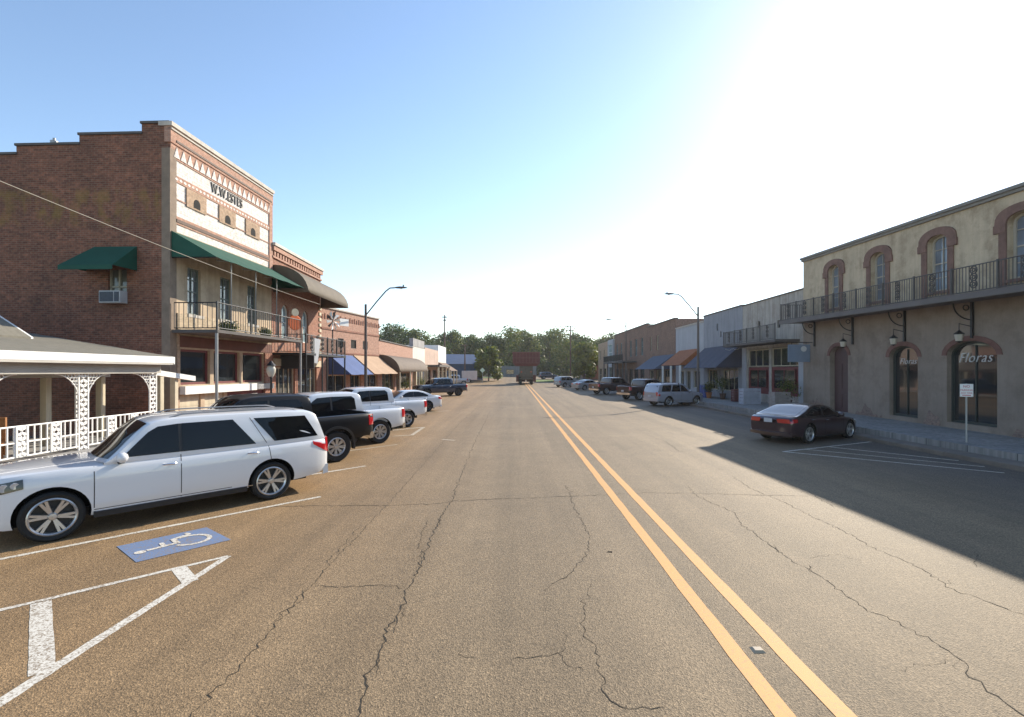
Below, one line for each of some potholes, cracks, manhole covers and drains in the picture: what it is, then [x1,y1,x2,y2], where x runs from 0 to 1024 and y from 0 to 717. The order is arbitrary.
crack [273,416,1022,717]
